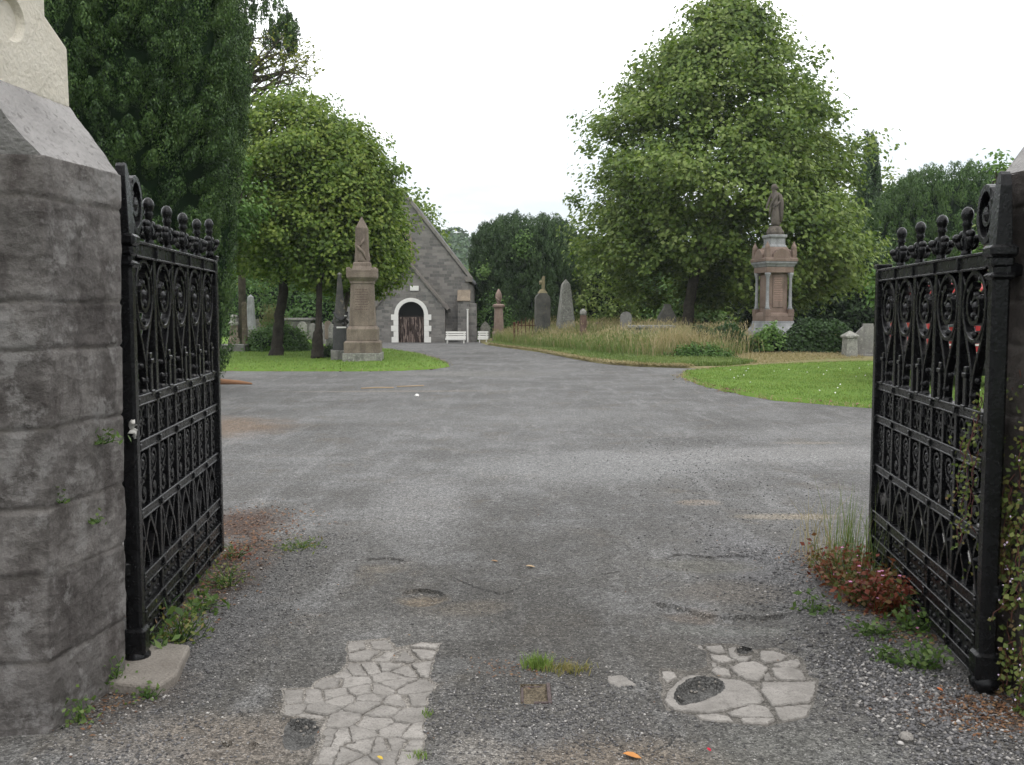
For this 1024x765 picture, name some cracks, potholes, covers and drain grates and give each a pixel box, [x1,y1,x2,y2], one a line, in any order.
crack [452,577,521,595]
manhole cover [520,683,552,704]
pothole [674,676,725,705]
pothole [282,718,319,751]
pothole [397,588,447,609]
